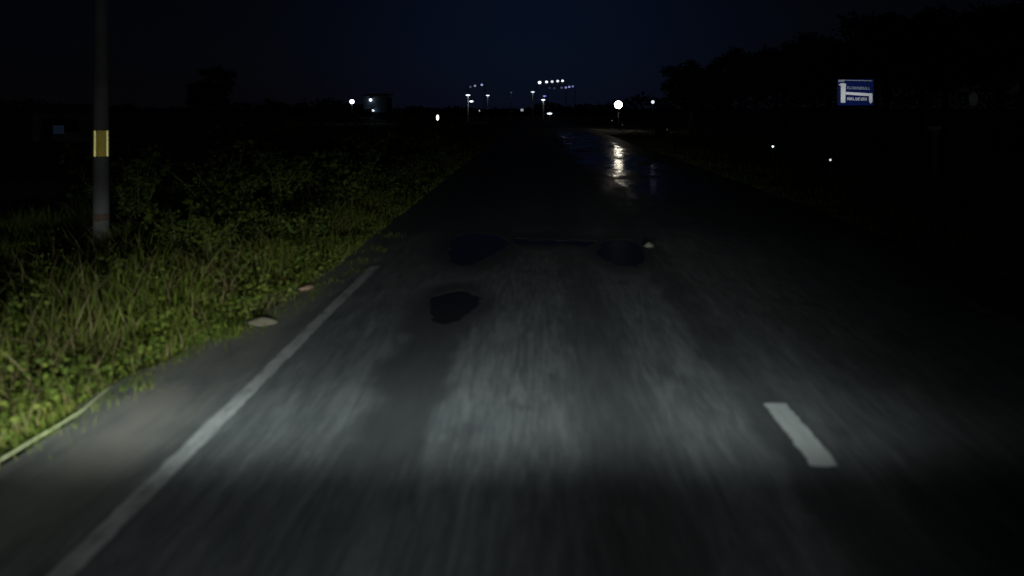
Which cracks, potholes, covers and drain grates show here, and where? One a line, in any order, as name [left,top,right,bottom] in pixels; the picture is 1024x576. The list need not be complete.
pothole [429,290,483,324]
crack [513,238,597,247]
pothole [448,232,510,266]
pothole [595,239,645,267]
